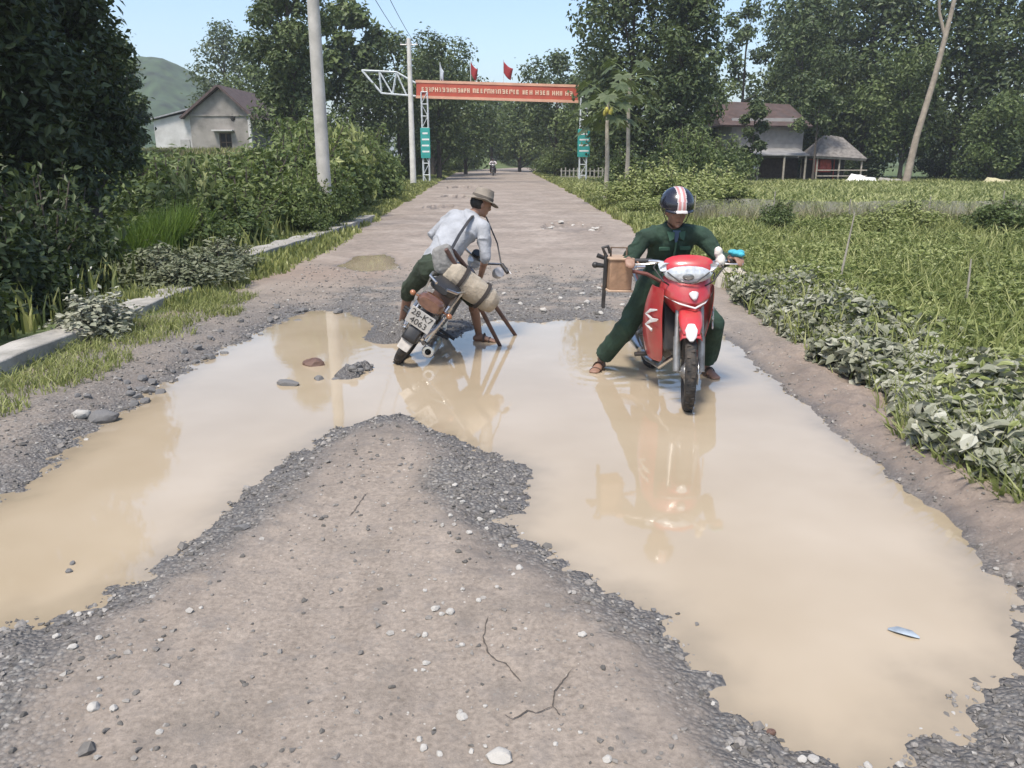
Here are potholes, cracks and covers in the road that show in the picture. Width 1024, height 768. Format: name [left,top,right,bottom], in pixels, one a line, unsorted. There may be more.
crack [483,618,521,681]
crack [506,669,572,719]
pothole [0,310,1024,768]
pothole [333,253,403,272]
